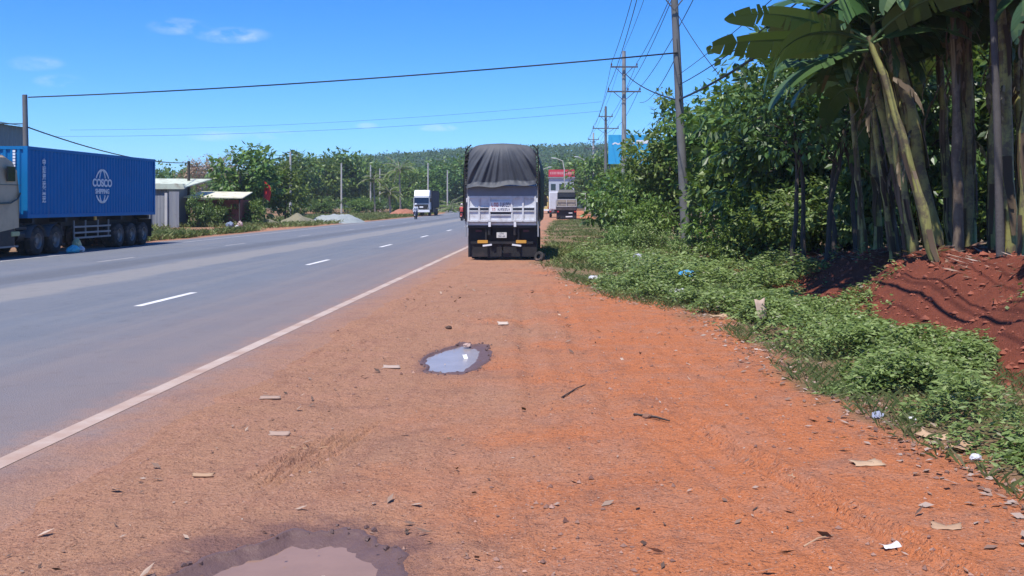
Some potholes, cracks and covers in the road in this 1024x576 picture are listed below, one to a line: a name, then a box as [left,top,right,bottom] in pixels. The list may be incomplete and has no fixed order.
pothole [418,341,494,375]
pothole [151,524,409,576]
